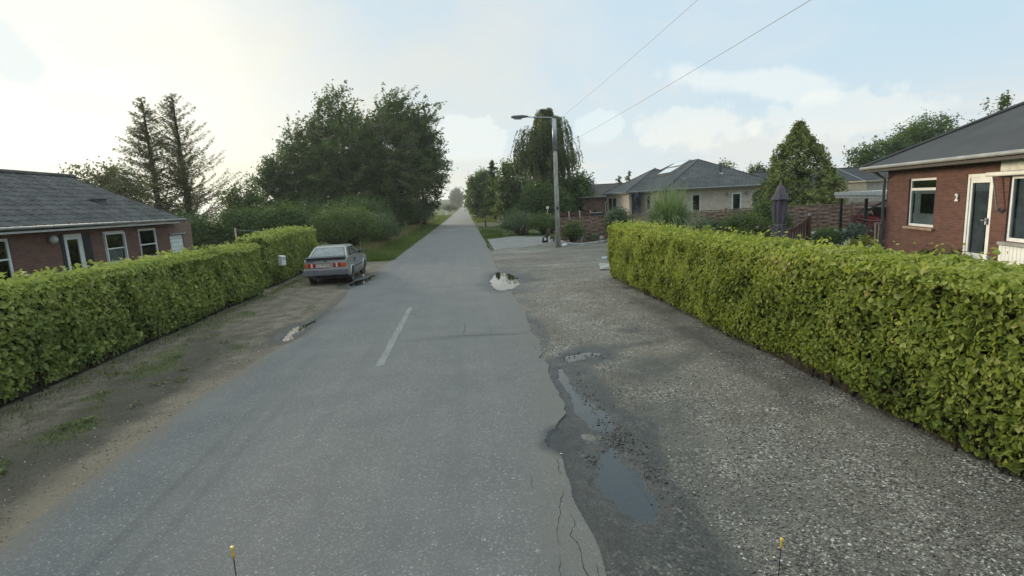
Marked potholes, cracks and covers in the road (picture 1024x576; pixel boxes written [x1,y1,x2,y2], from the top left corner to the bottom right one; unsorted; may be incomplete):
pothole [581,441,674,532]
pothole [553,350,609,363]
pothole [551,365,622,439]
pothole [272,310,331,342]
crack [557,494,599,576]
pothole [489,272,520,291]
